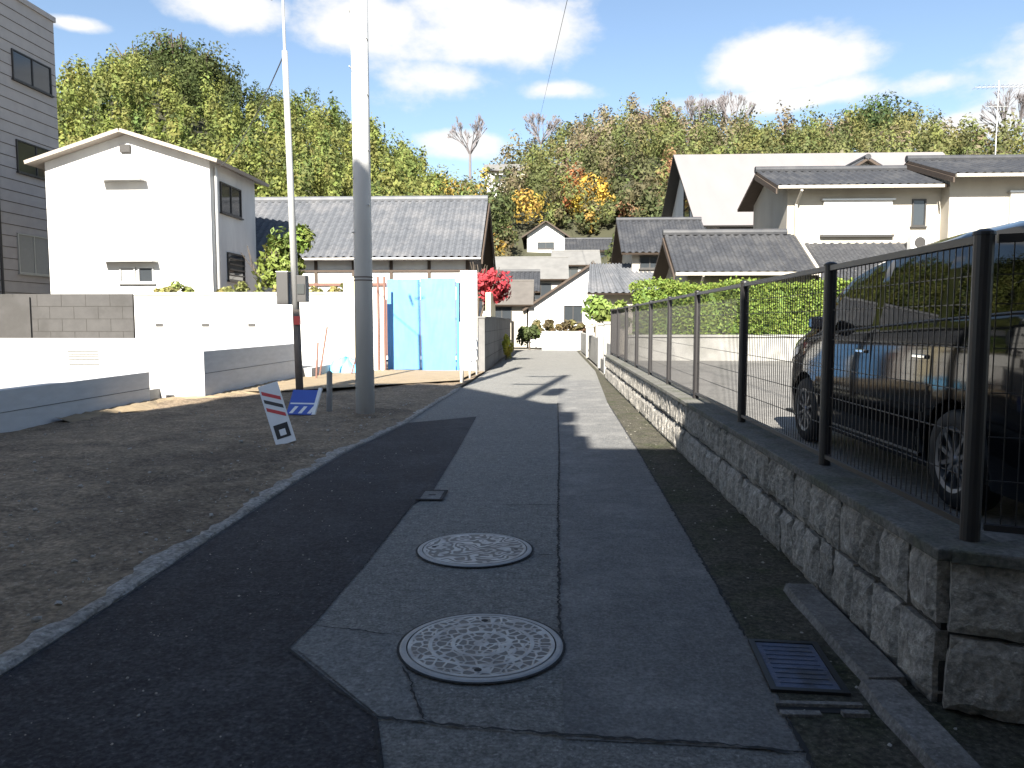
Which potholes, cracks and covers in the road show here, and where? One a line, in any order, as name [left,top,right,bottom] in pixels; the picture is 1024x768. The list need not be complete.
manhole cover [416,533,534,568]
manhole cover [397,613,566,684]
utility cover [415,490,448,500]
crack [316,625,390,634]
